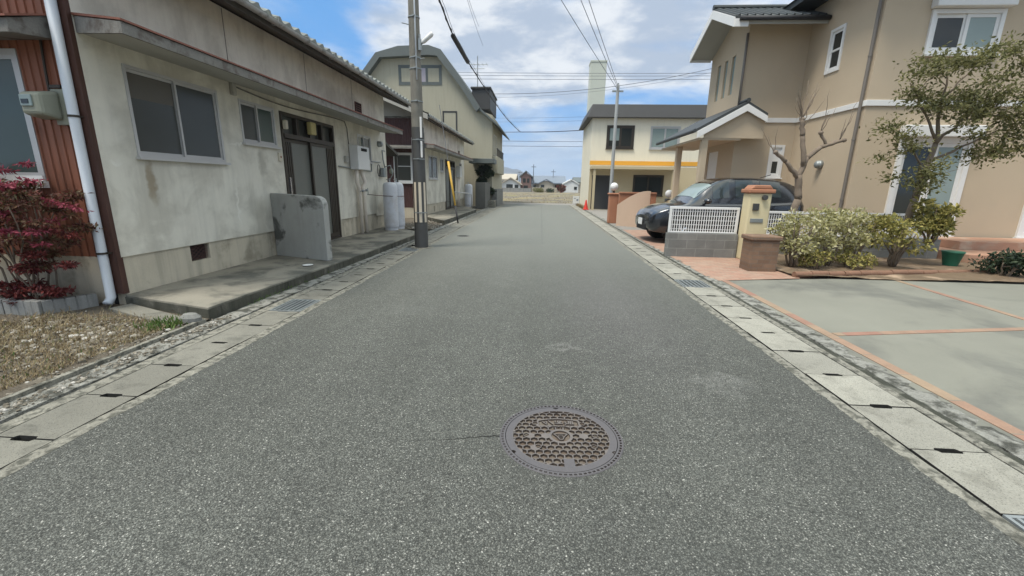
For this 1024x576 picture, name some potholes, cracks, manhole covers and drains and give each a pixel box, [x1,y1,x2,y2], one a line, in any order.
drain grate [1002,514,1024,532]
manhole cover [500,405,624,477]
drain grate [269,299,321,312]
drain grate [674,280,713,288]
